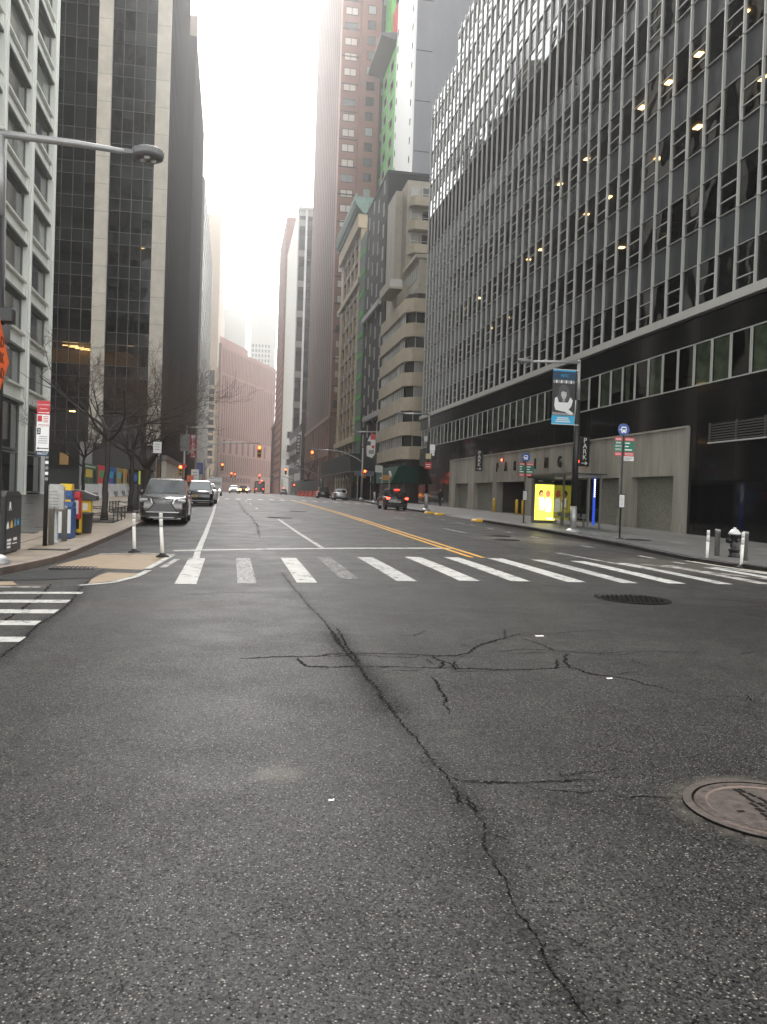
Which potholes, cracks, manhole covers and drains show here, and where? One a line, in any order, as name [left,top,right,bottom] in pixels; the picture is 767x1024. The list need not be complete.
crack [257,578,678,1023]
manhole cover [594,594,672,604]
manhole cover [682,779,767,840]
